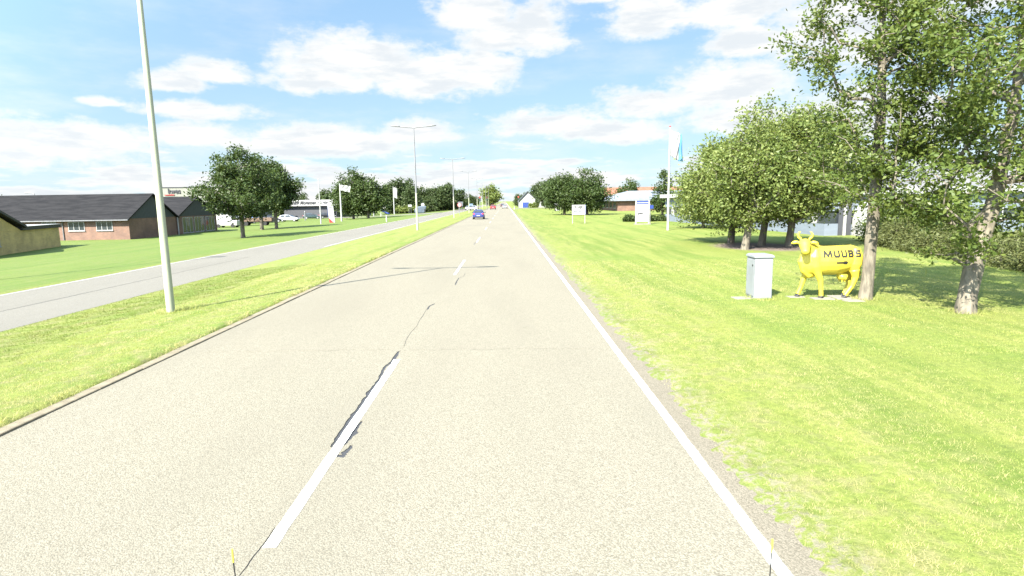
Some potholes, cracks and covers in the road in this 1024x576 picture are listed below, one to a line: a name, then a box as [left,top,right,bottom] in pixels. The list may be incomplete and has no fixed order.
crack [331,348,522,458]
